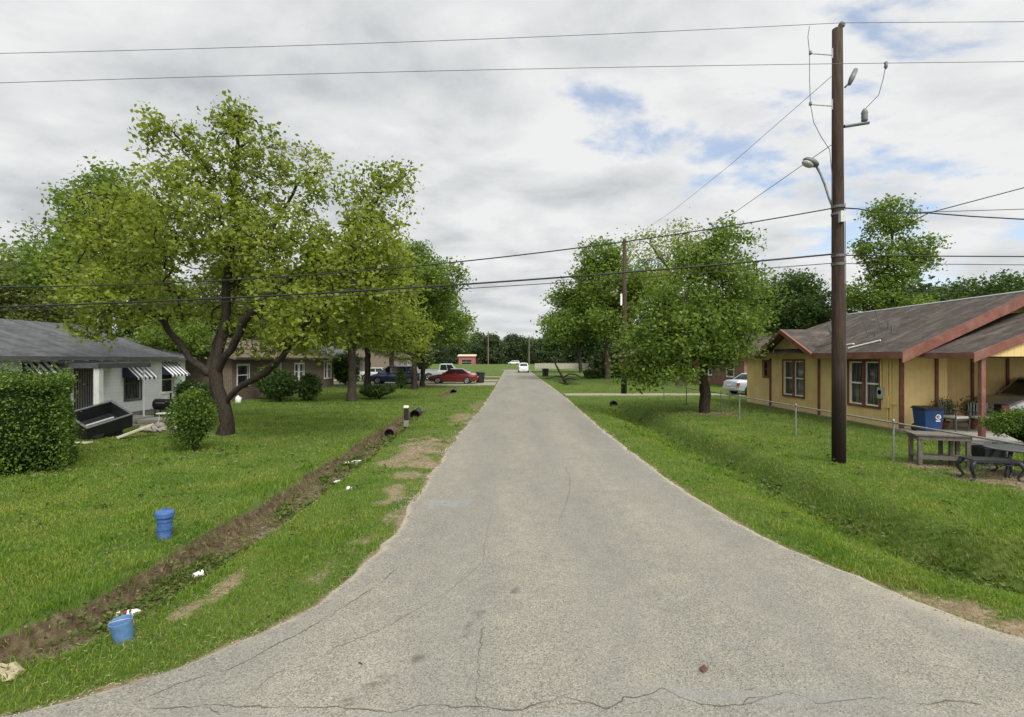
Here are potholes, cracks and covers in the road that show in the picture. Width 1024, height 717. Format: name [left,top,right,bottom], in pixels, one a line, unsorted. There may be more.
crack [169,513,980,714]
